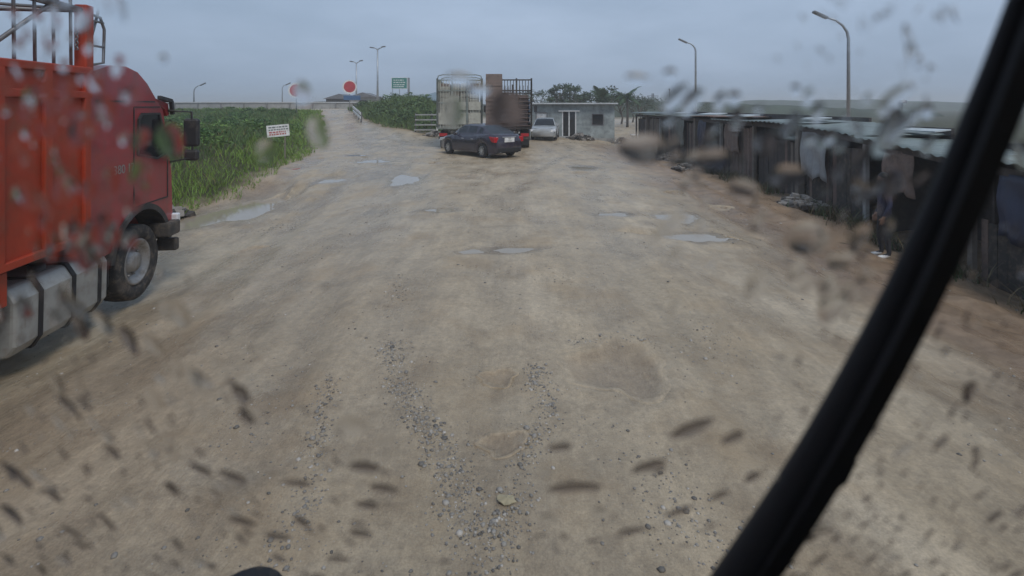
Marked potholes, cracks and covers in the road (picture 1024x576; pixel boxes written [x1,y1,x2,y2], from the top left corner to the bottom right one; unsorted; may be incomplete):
pothole [475,367,519,389]
pothole [555,334,671,405]
pothole [474,429,529,460]
